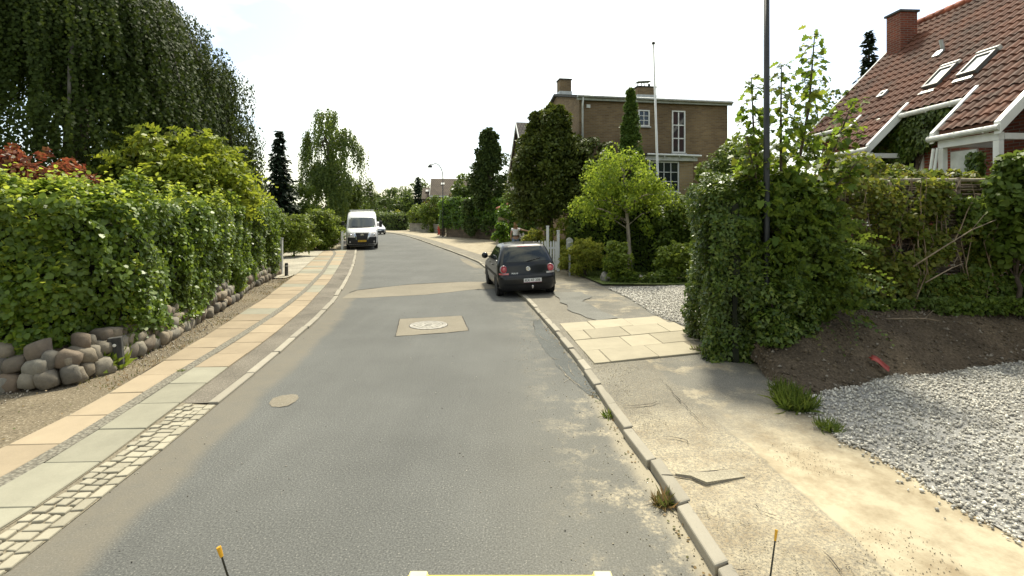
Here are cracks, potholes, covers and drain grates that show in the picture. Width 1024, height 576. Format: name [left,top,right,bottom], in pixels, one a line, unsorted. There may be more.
crack [661,468,745,485]
manhole cover [409,321,448,329]
